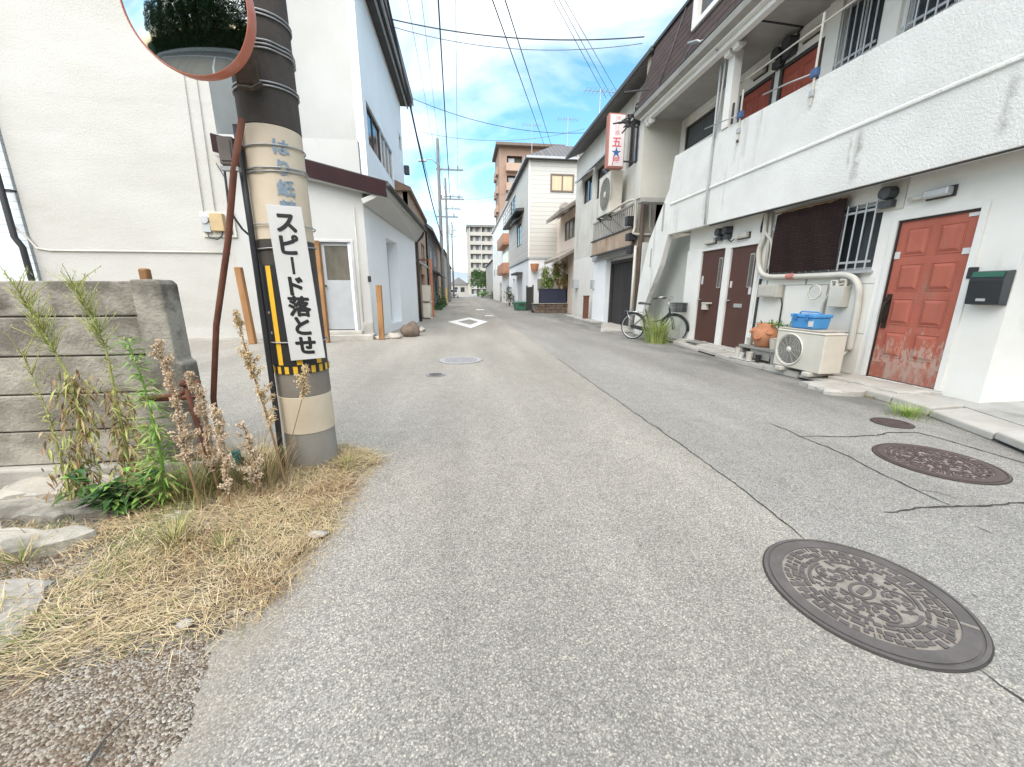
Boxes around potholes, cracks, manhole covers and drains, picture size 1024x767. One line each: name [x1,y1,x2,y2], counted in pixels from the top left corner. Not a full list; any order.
manhole cover [871,443,1013,485]
crack [773,424,1024,534]
manhole cover [762,539,995,673]
manhole cover [439,356,483,364]
manhole cover [870,417,915,429]
